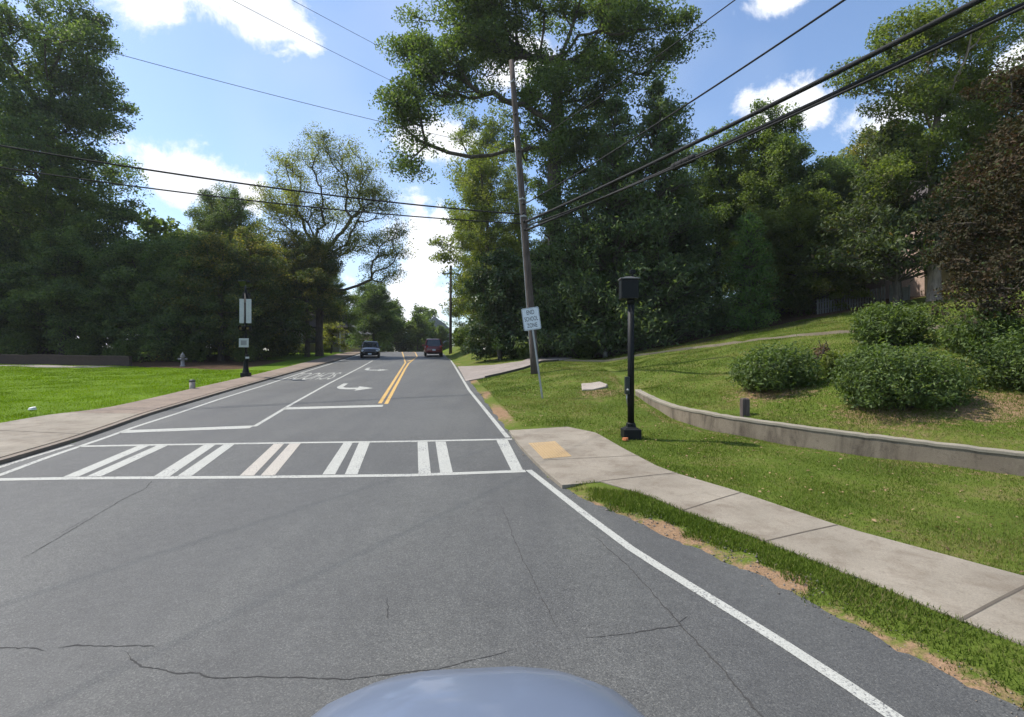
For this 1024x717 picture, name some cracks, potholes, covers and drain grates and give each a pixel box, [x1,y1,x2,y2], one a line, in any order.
crack [64,644,521,680]
crack [499,503,560,630]
crack [586,537,764,717]
